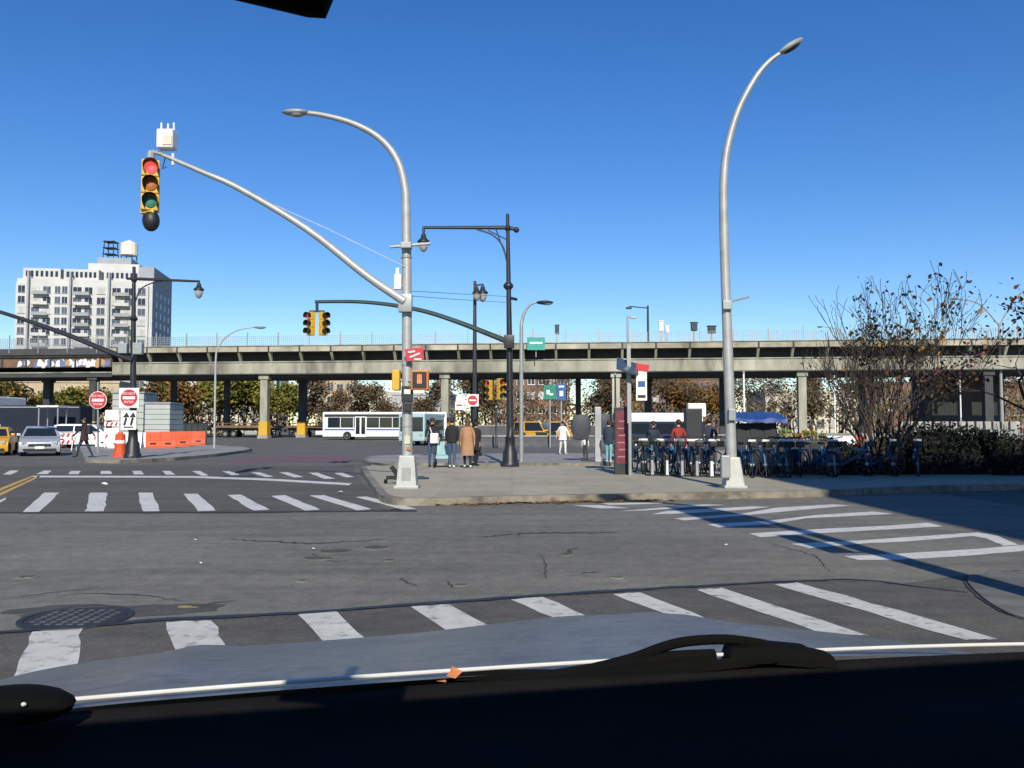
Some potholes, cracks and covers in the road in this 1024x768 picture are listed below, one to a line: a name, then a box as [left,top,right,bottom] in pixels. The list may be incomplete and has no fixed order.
crack [235,539,379,562]
crack [6,587,234,606]
crack [486,532,612,553]
manhole cover [15,605,135,631]
